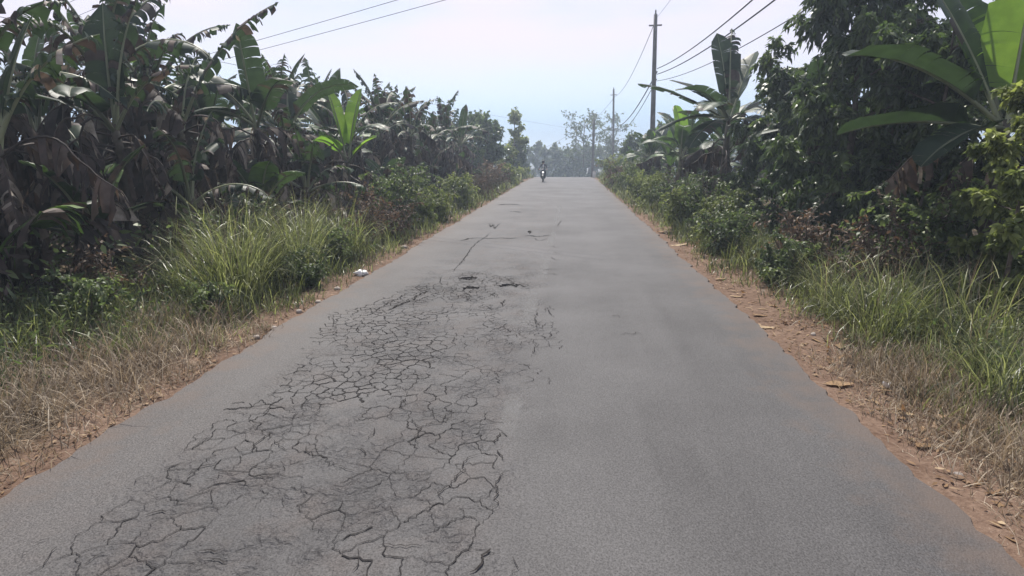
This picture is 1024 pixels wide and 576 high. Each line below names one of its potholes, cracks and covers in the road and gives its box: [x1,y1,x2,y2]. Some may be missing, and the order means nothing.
crack [22,204,563,576]
